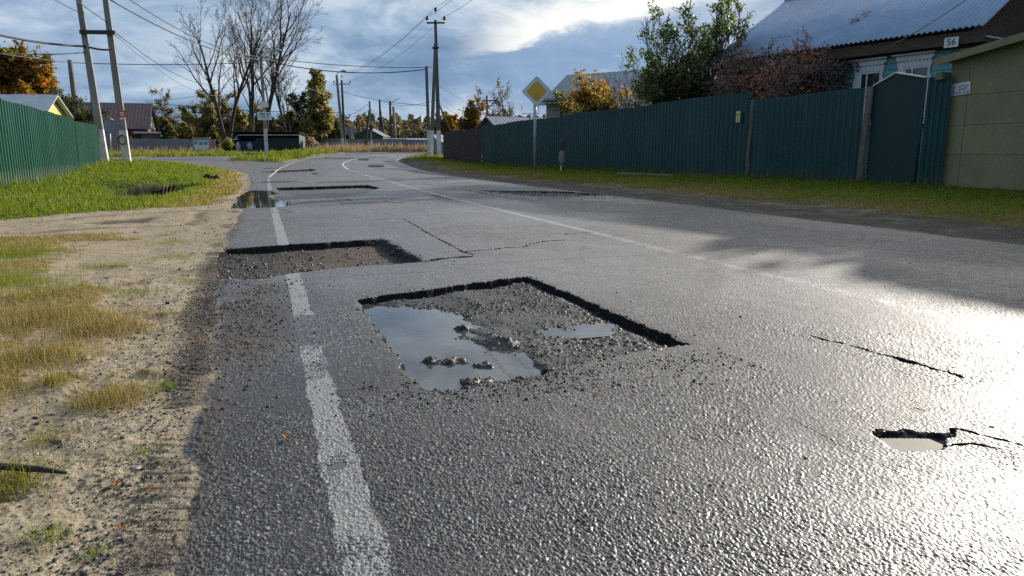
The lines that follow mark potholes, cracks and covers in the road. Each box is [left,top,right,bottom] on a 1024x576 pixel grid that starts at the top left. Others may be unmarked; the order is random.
pothole [356,276,690,391]
pothole [275,185,380,196]
pothole [215,239,423,280]
crack [811,336,964,378]
crack [948,428,1024,450]
pothole [871,428,957,453]
crack [422,232,584,262]
